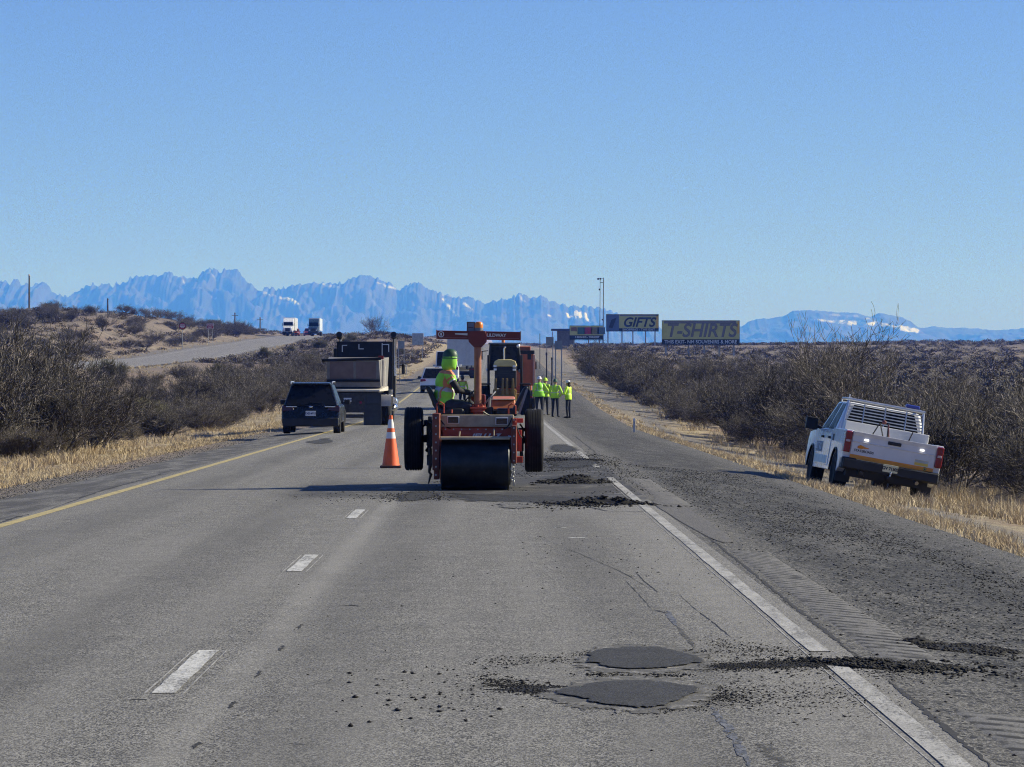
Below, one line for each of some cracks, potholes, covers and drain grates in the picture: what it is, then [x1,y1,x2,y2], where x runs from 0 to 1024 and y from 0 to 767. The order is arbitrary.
crack [549,541,731,637]
